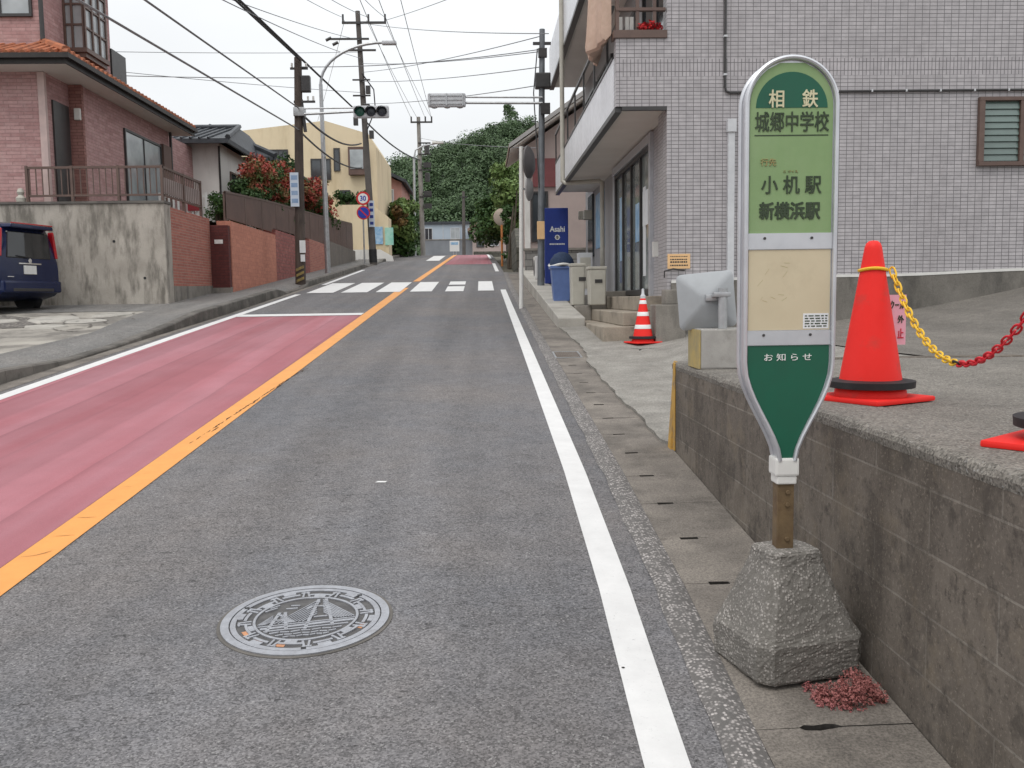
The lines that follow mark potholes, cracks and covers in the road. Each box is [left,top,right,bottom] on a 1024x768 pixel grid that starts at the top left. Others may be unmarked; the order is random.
crack [190,367,306,443]
manhole cover [216,585,393,659]
